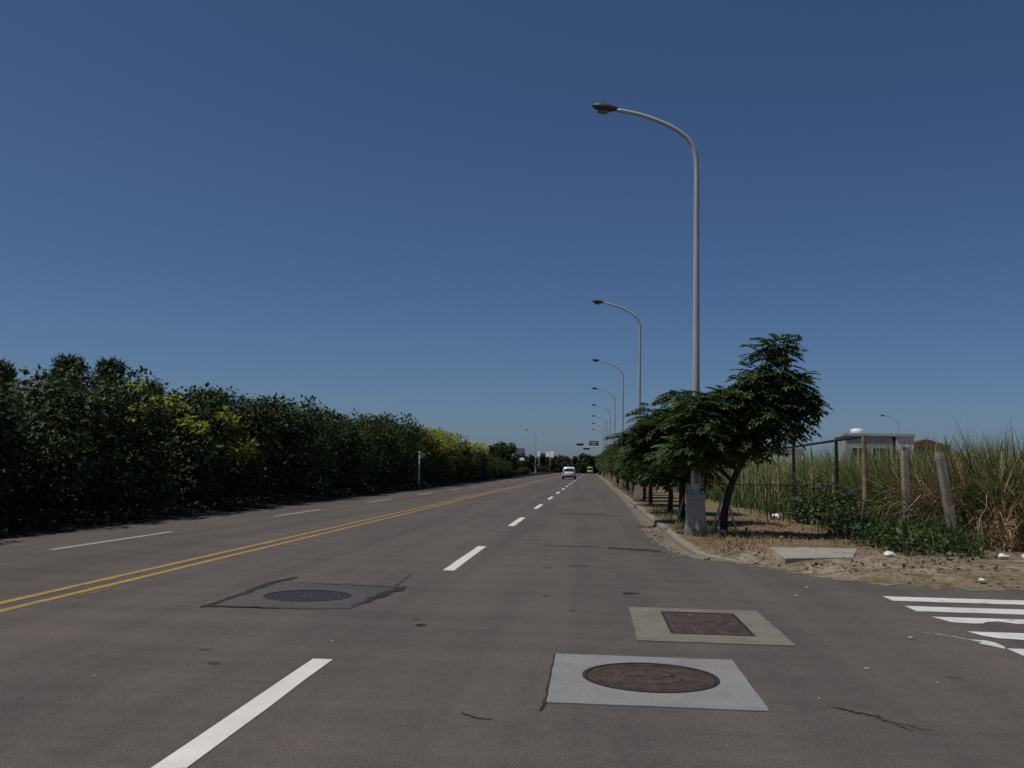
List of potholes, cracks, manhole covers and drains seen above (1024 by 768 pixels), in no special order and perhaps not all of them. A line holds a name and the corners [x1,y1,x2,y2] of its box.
manhole cover [547,653,769,712]
manhole cover [216,582,397,609]
crack [539,654,555,711]
crack [832,705,912,730]
manhole cover [629,607,796,647]
